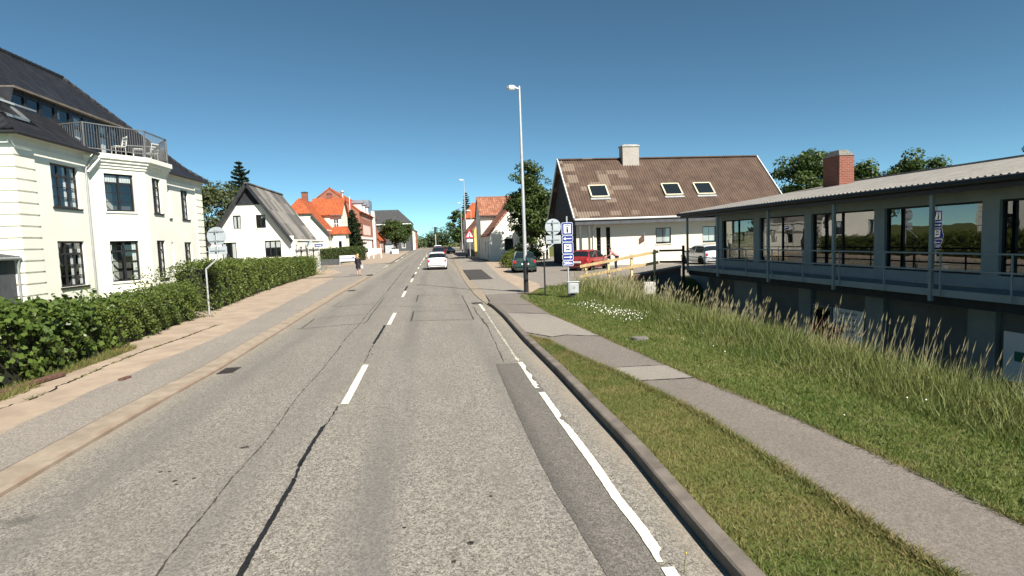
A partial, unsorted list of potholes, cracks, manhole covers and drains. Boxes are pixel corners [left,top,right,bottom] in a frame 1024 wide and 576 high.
crack [156,271,504,576]
